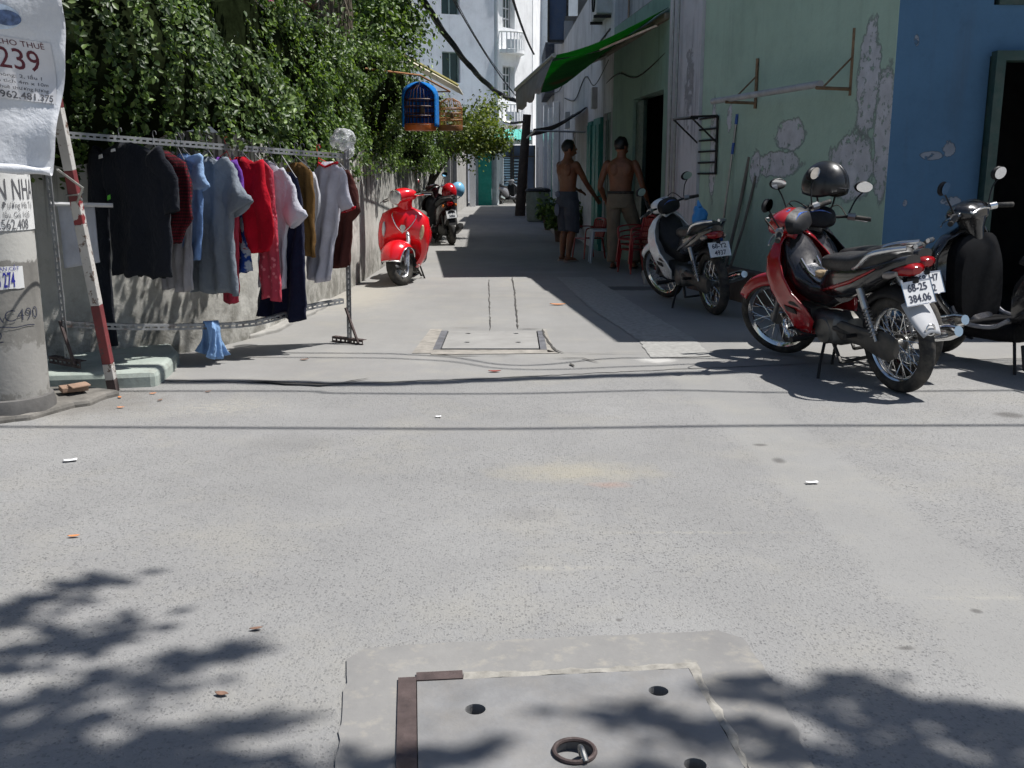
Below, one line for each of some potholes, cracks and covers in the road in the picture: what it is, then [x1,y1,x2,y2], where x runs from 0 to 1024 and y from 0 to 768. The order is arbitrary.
manhole cover [335,630,815,768]
manhole cover [412,329,559,355]
